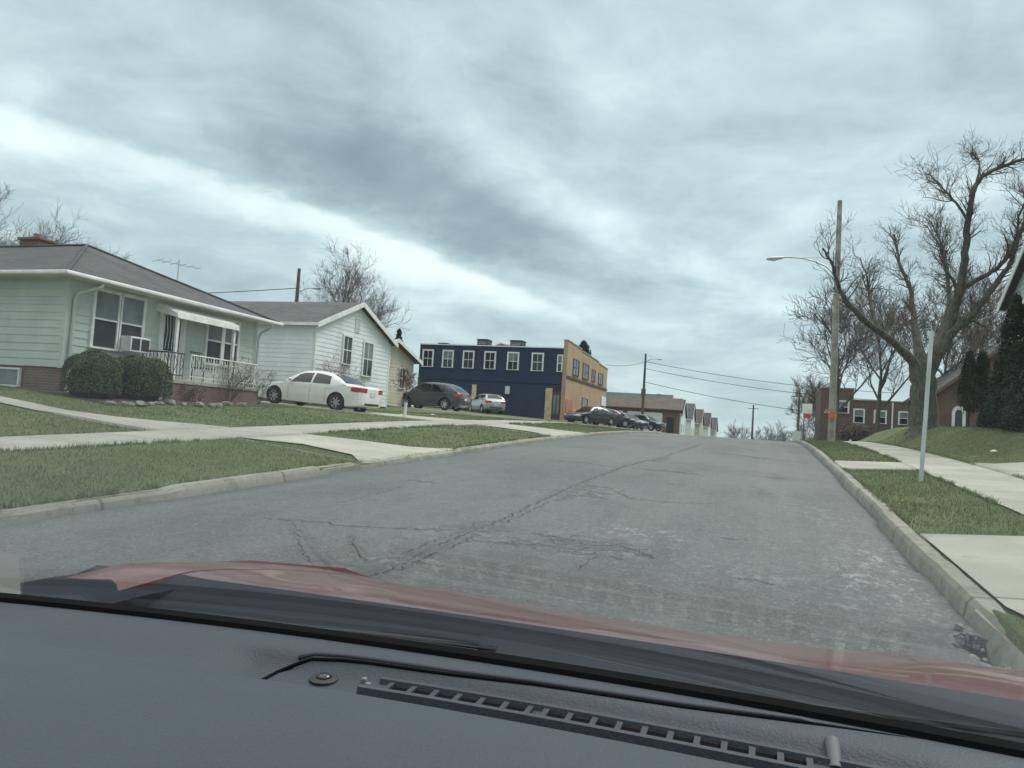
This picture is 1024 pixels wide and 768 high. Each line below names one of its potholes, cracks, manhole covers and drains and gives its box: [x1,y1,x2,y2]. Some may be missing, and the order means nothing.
pothole [948,631,1012,670]
crack [263,480,655,571]
